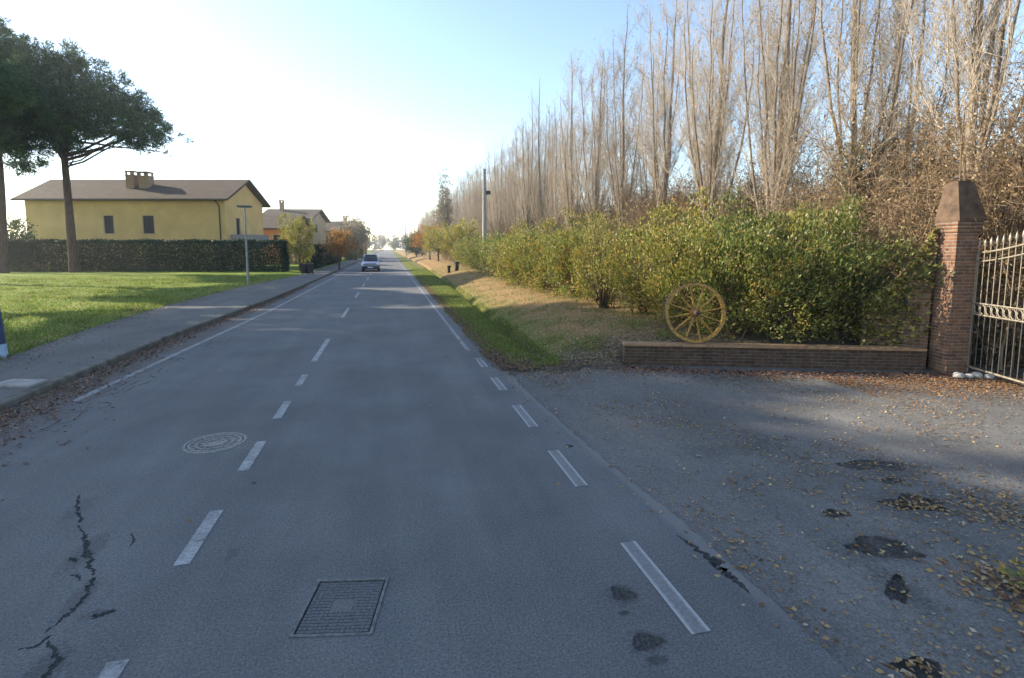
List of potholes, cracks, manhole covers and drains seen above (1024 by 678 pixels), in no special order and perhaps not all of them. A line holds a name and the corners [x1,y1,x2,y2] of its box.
pothole [611,586,637,601]
crack [18,495,117,678]
pothole [878,493,947,512]
pothole [889,656,942,678]
pothole [632,632,666,652]
pothole [842,535,927,559]
pothole [823,509,850,518]
manhole cover [288,577,389,638]
manhole cover [182,432,247,454]
crack [677,535,750,594]
pothole [834,459,908,471]
pothole [884,573,910,604]
